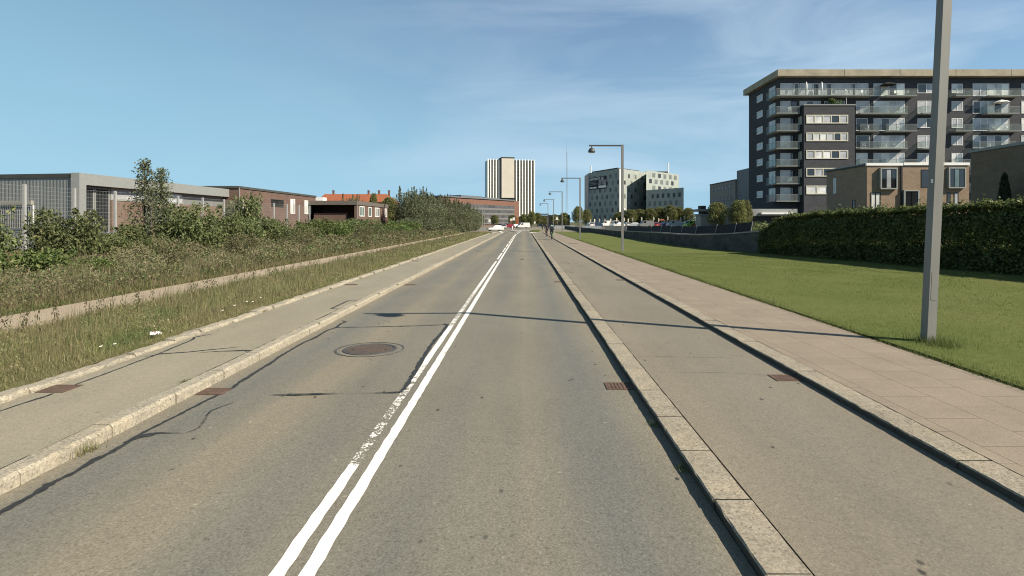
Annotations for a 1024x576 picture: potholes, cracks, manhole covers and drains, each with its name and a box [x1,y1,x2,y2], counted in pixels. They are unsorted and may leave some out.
manhole cover [334,342,404,357]
